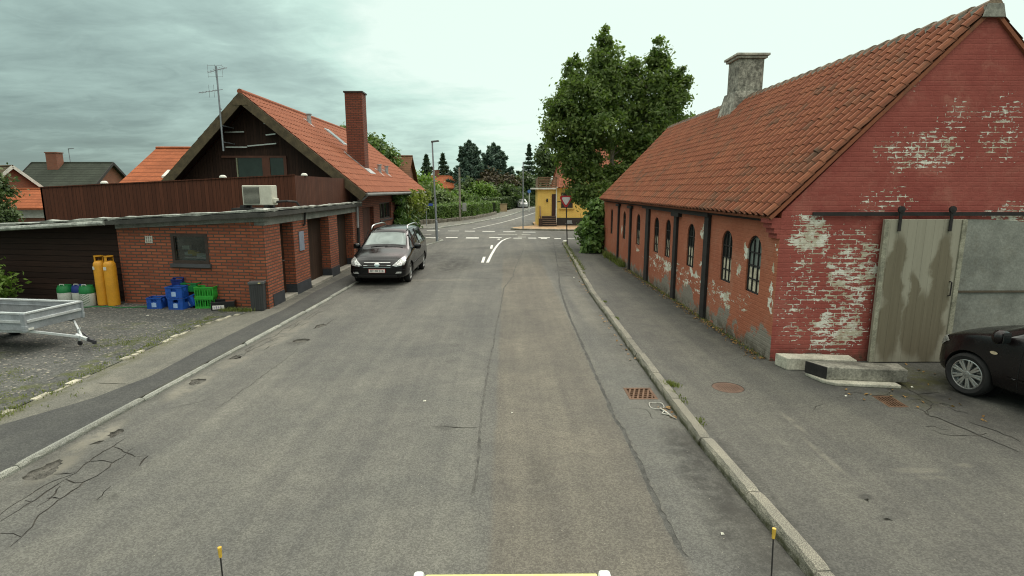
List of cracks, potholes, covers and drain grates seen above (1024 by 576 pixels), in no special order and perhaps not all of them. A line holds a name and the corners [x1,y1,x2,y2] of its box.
manhole cover [711,382,745,393]
crack [0,439,147,547]
drain grate [623,388,658,399]
drain grate [873,396,908,407]
pothole [22,459,63,481]
crack [814,383,1020,452]
